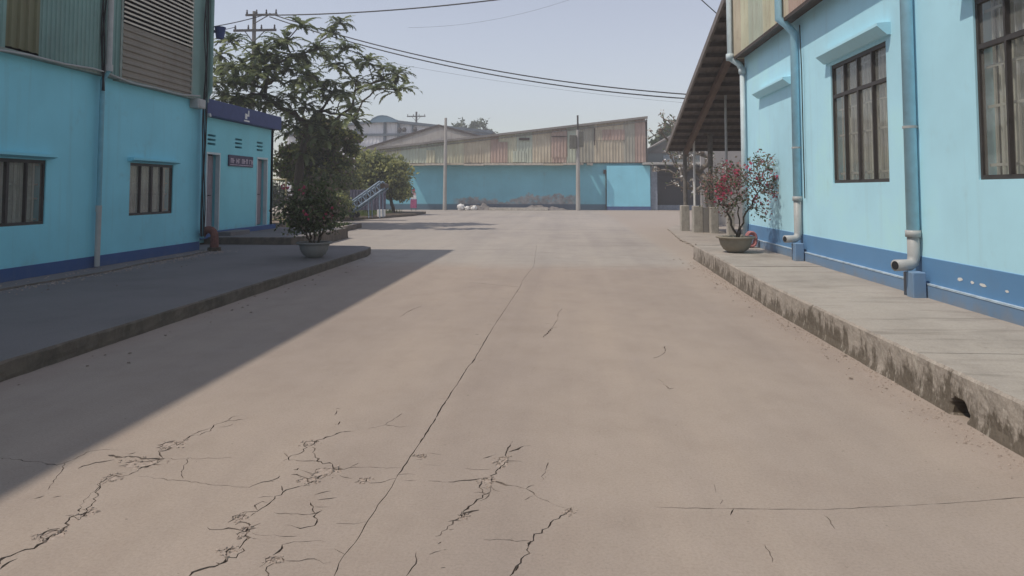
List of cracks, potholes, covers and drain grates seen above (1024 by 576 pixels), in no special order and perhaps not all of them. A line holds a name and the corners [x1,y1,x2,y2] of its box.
crack [189,408,415,576]
crack [406,441,578,576]
crack [0,416,242,569]
